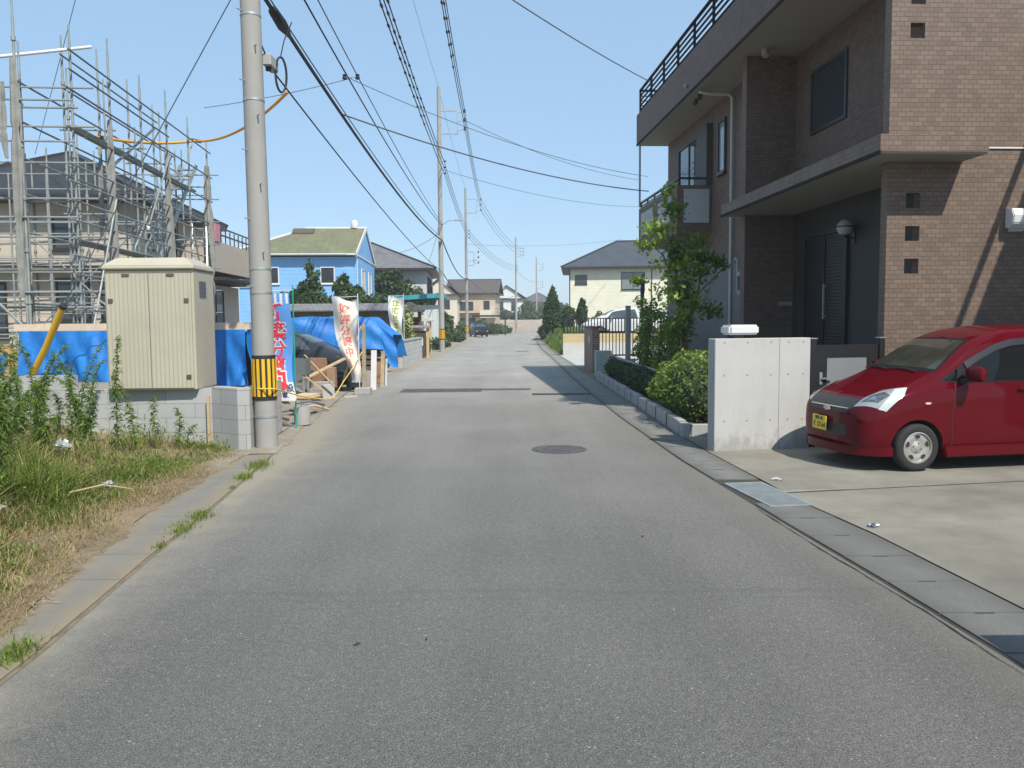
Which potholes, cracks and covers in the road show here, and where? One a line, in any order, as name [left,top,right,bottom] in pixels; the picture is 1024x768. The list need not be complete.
manhole cover [532,445,587,454]
drain grate [724,482,813,507]
